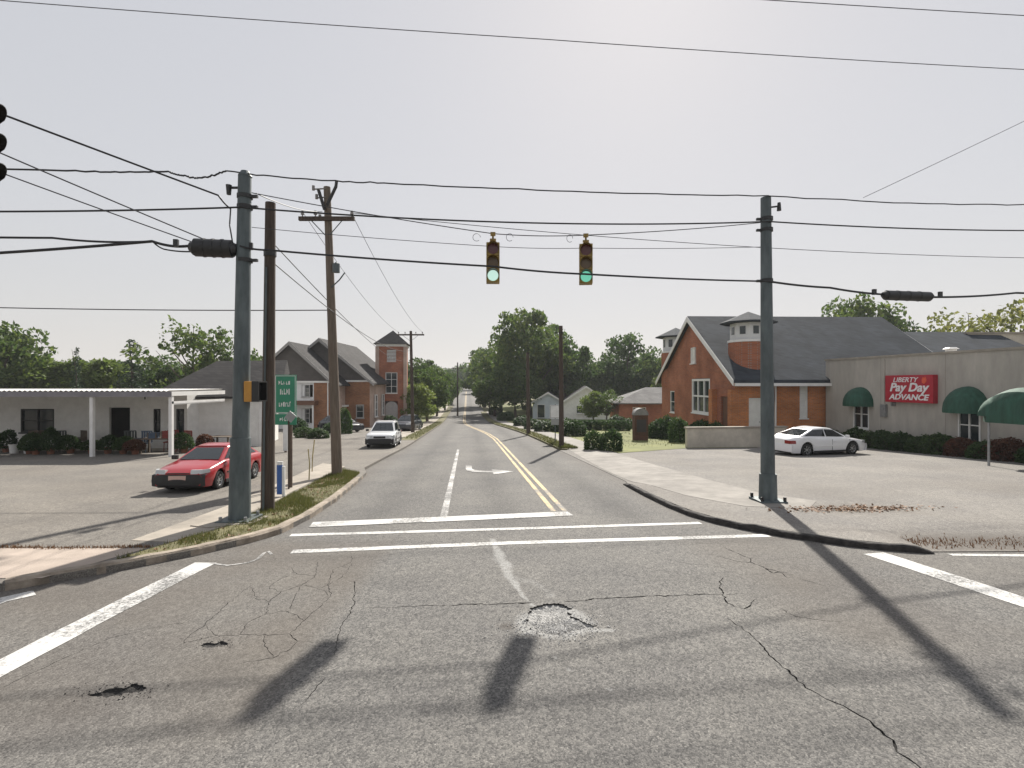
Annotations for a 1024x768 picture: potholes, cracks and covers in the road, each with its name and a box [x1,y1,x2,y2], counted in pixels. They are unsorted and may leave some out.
crack [565,548,921,768]
pothole [526,603,597,636]
crack [4,556,532,687]
pothole [89,683,146,698]
